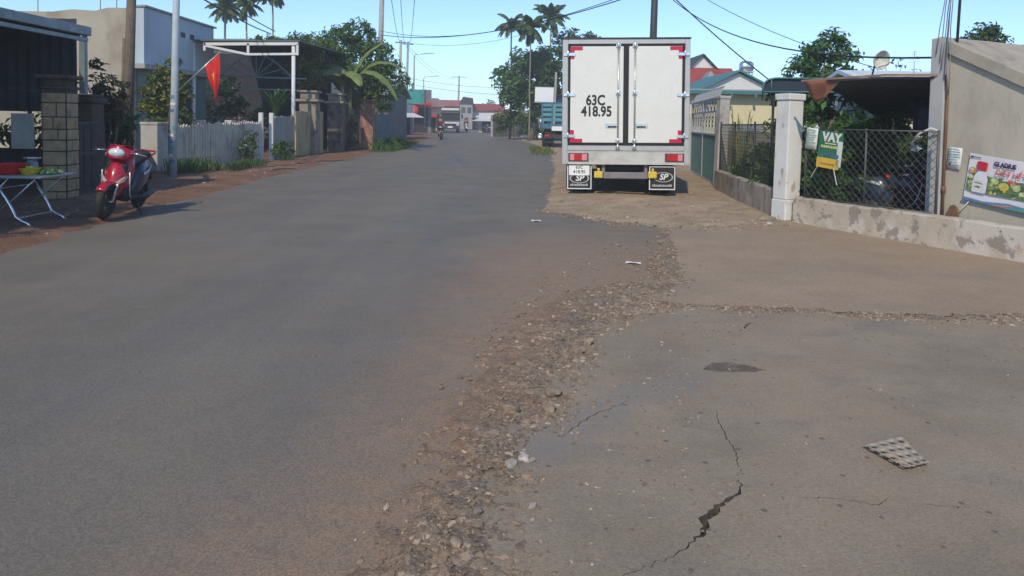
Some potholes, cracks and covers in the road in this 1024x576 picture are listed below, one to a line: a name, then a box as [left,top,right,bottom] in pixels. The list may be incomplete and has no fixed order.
crack [623,411,743,576]
crack [807,496,886,505]
